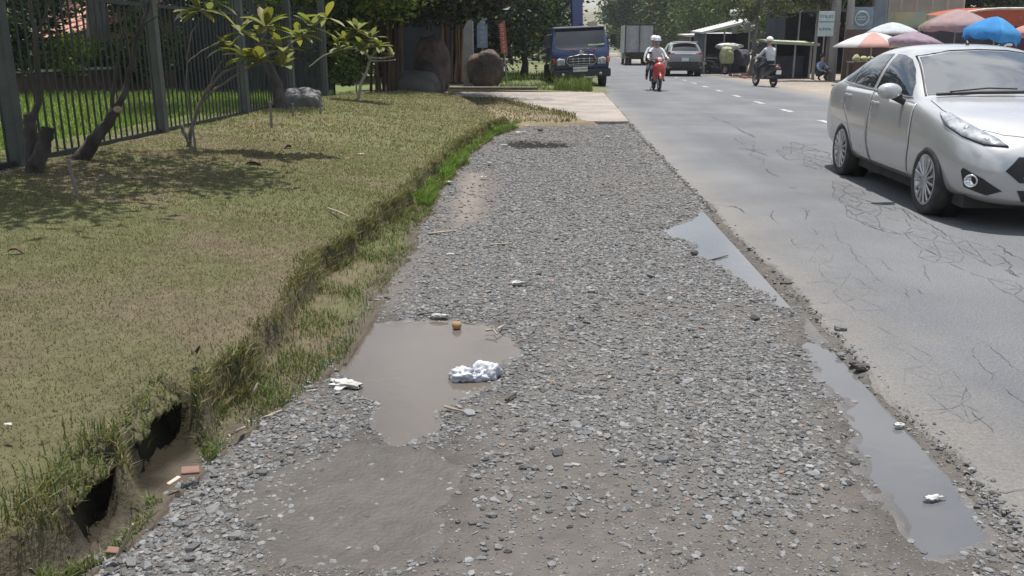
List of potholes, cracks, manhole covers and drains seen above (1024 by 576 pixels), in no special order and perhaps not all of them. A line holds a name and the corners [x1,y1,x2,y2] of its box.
pothole [801,342,999,563]
pothole [333,315,524,447]
crack [770,179,1024,337]
crack [715,118,837,188]
crack [902,346,993,430]
pothole [656,211,791,308]
